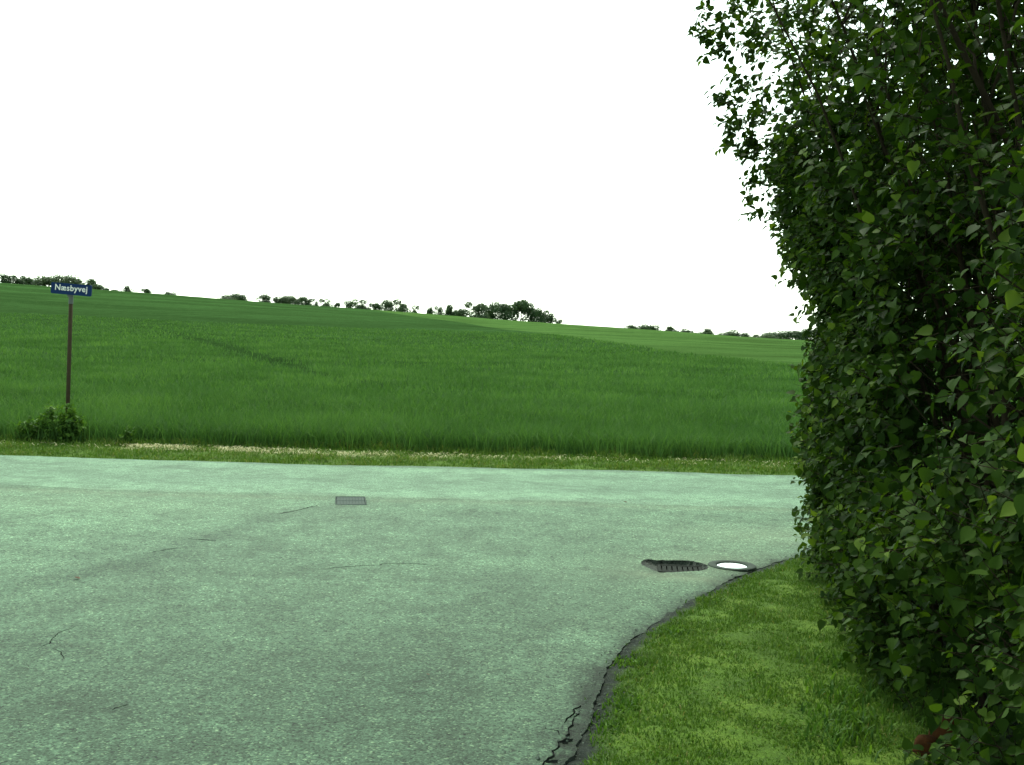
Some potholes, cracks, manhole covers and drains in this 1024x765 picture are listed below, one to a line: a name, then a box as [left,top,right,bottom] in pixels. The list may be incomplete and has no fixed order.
manhole cover [708,560,756,572]
crack [542,705,581,765]
